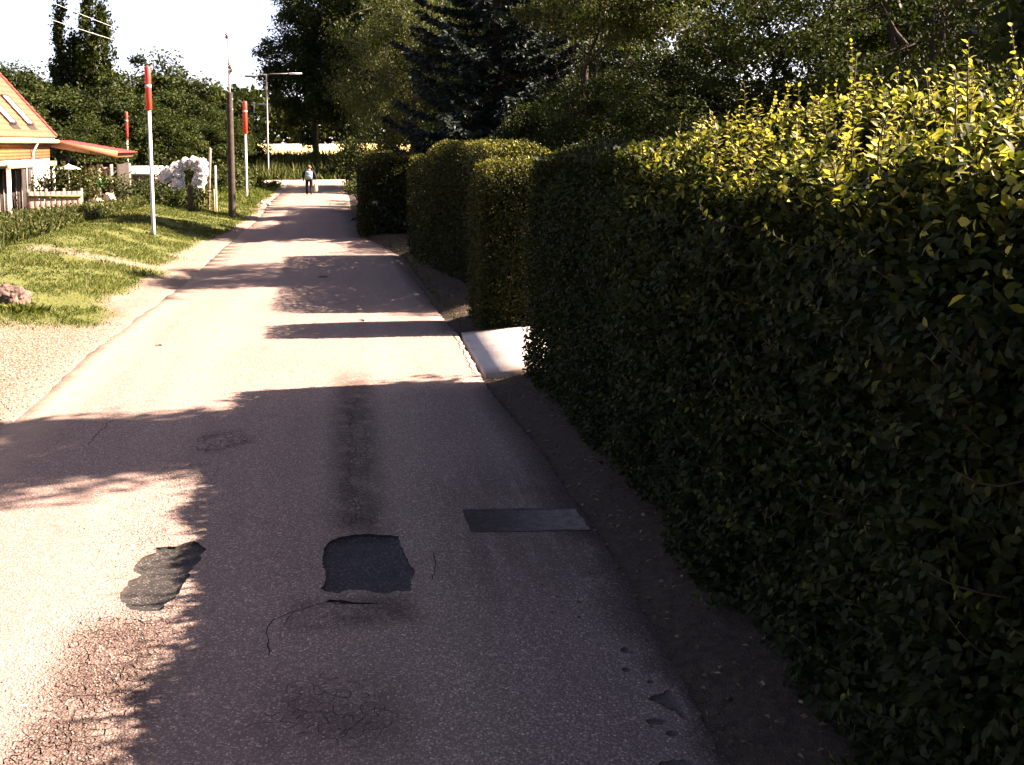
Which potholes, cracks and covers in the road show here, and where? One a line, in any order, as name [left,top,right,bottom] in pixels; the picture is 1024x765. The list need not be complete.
crack [266,599,378,657]
crack [340,397,373,528]
pothole [647,690,688,720]
crack [2,616,175,765]
pothole [119,541,206,611]
crack [249,672,411,743]
pothole [321,534,415,594]
crack [423,550,581,580]
